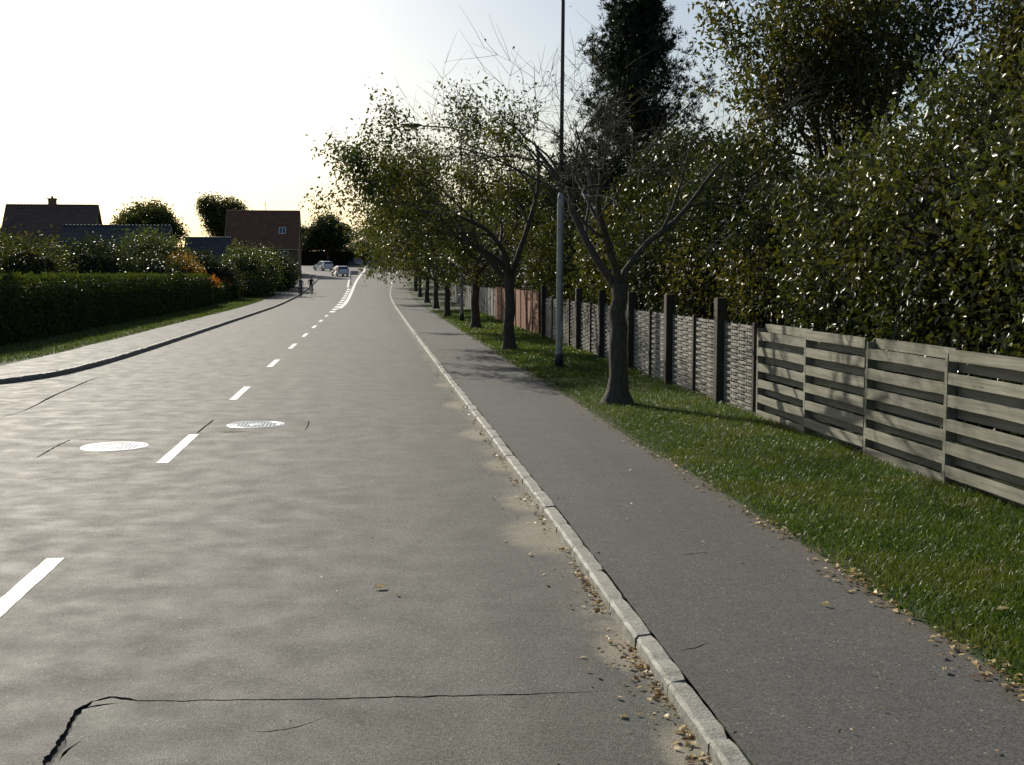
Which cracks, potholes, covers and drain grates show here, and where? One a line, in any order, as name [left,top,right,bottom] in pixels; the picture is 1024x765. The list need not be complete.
manhole cover [80,442,149,451]
crack [42,691,591,765]
